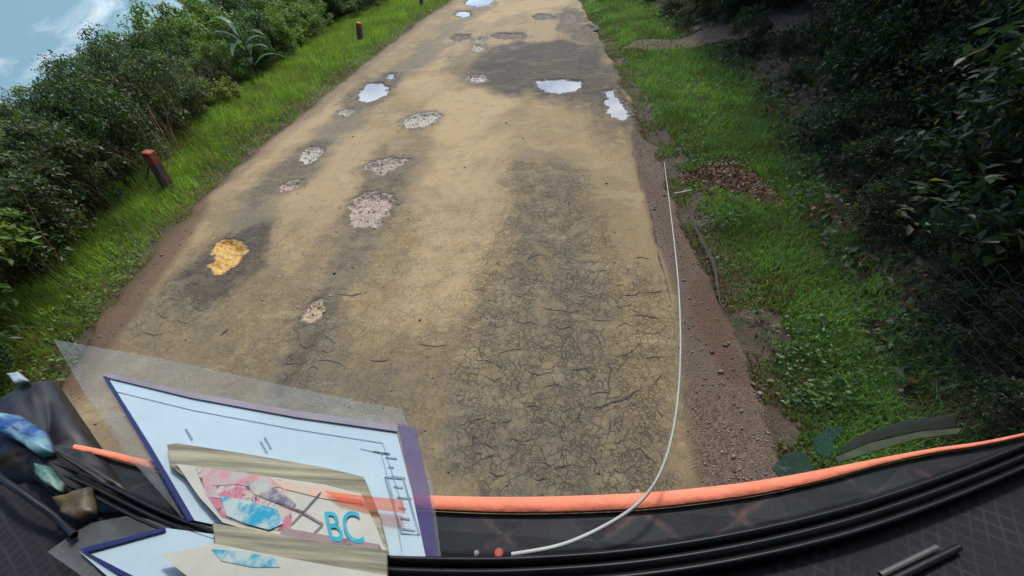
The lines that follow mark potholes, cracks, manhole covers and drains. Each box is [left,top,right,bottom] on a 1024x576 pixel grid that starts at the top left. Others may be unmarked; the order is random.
pothole [594,86,639,124]
pothole [483,30,527,41]
pothole [334,185,408,233]
pothole [396,109,443,132]
pothole [467,42,491,53]
crack [473,169,672,481]
pothole [530,78,588,96]
pothole [348,80,399,103]
pothole [284,142,329,166]
pothole [352,153,418,179]
